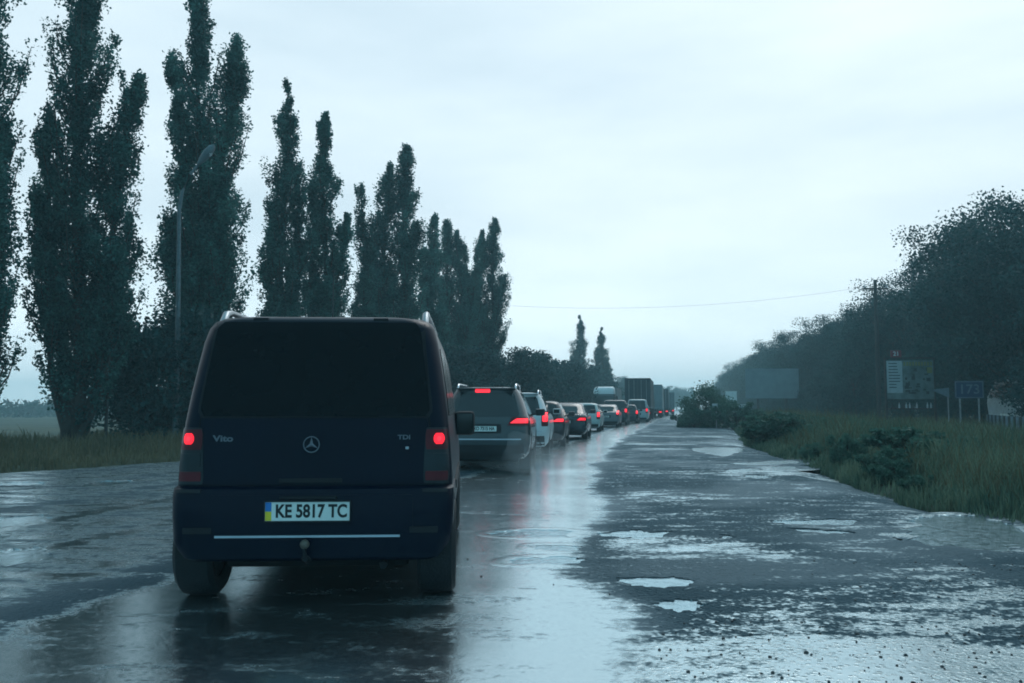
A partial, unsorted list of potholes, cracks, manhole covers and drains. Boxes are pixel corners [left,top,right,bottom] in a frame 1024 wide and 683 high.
pothole [763,525,884,537]
pothole [566,526,723,543]
pothole [580,570,732,596]
pothole [678,447,761,457]
pothole [744,516,922,530]
pothole [611,590,750,622]
